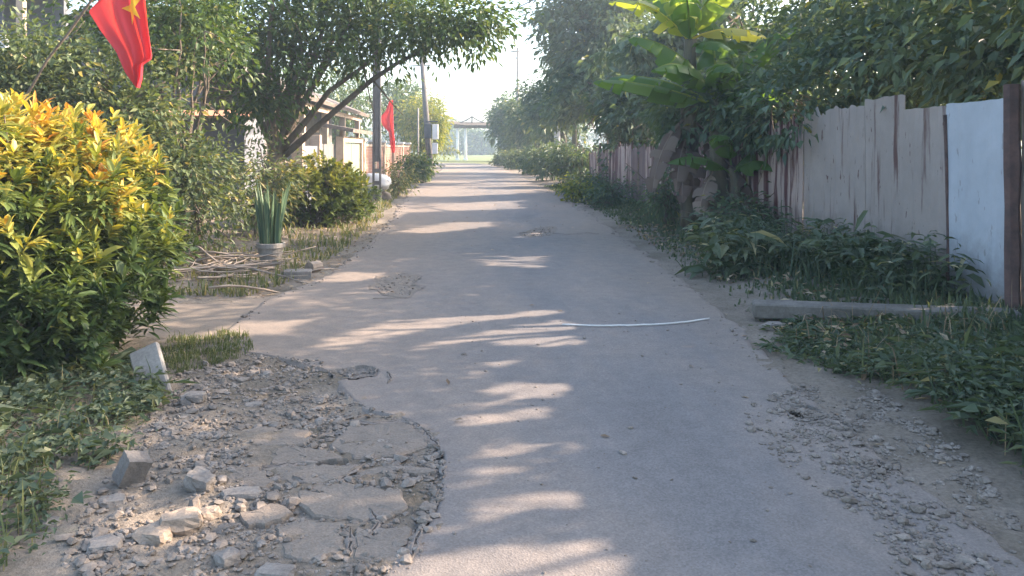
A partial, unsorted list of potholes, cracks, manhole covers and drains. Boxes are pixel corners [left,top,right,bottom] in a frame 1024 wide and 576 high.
crack [344,508,381,556]
pothole [356,469,440,527]
pothole [519,226,557,238]
crack [407,524,425,559]
pothole [368,271,424,299]
pothole [787,405,822,422]
crack [262,461,365,485]
pothole [328,365,378,380]
crack [316,419,449,479]
